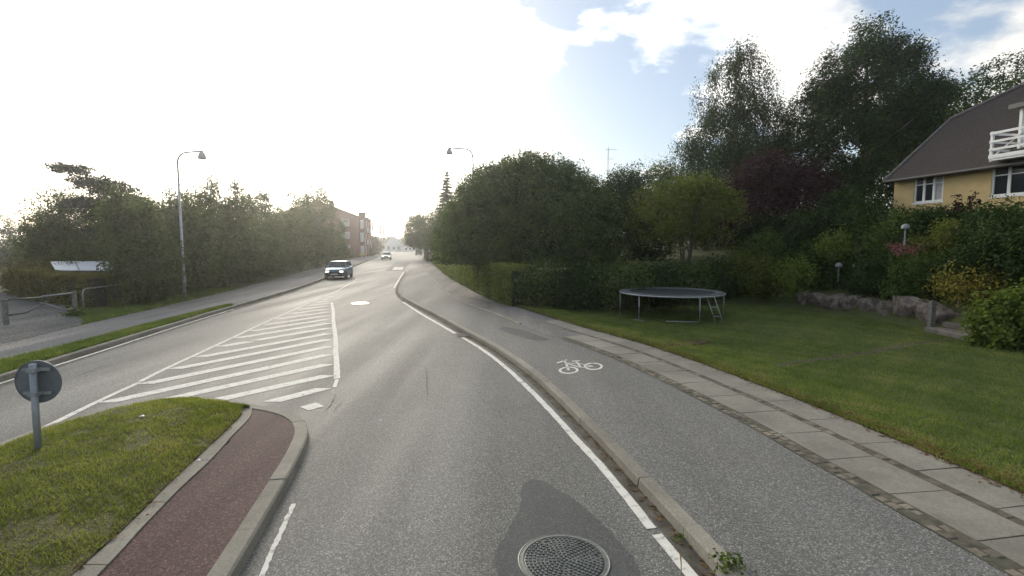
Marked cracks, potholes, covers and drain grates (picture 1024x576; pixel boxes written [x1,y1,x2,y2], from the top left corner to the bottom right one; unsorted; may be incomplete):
manhole cover [518,534,611,576]
